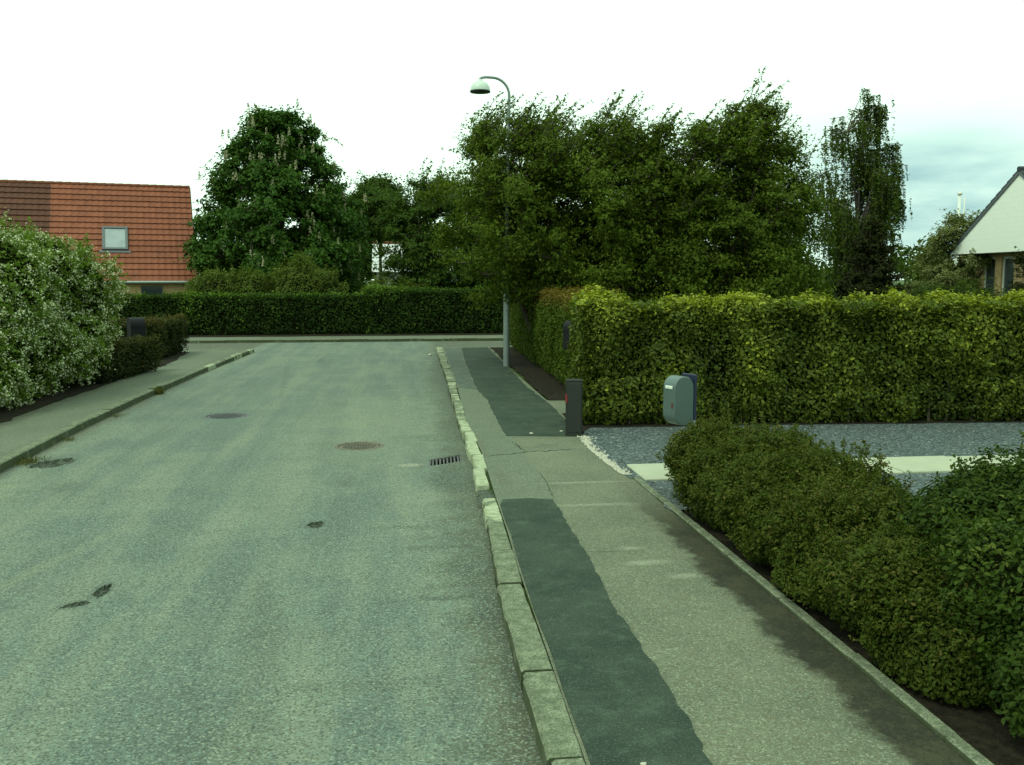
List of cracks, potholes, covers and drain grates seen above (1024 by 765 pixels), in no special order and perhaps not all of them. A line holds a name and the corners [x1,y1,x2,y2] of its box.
crack [484,442,570,457]
pothole [27,457,78,469]
pothole [90,583,113,599]
manhole cover [334,441,384,451]
drain grate [429,455,462,466]
pothole [59,600,91,609]
